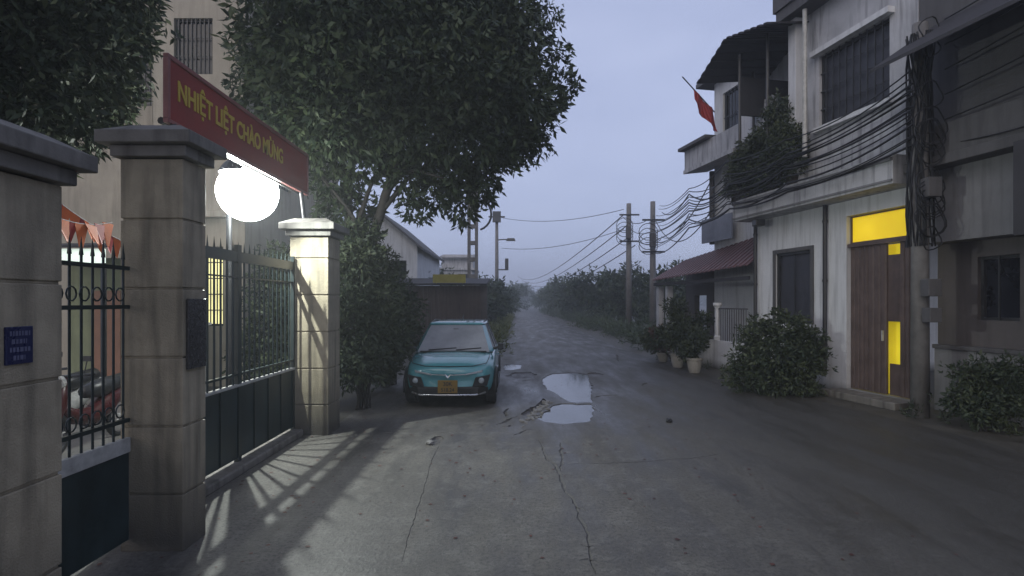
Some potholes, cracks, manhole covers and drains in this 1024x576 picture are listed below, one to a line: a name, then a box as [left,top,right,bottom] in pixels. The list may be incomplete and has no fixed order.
crack [587,454,717,464]
